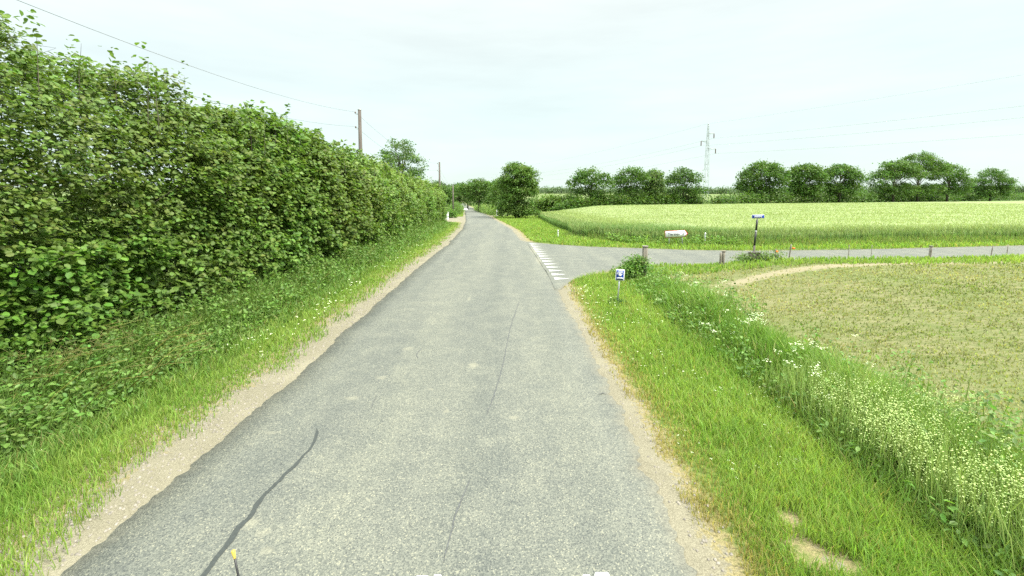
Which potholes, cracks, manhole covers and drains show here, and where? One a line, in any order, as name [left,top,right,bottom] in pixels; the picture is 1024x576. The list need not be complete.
crack [443,479,470,562]
crack [487,303,519,413]
